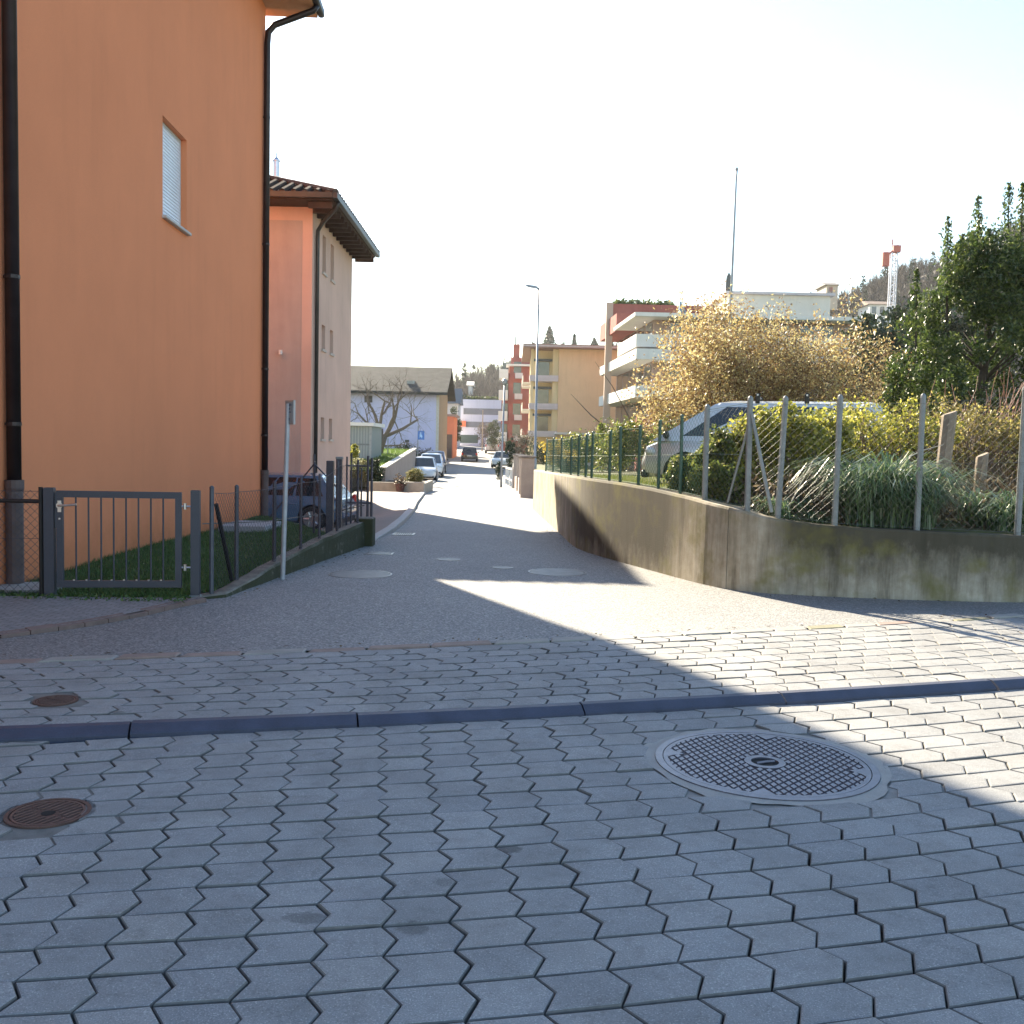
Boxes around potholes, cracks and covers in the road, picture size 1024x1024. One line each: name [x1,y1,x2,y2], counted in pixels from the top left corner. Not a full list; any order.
manhole cover [3,798,92,829]
manhole cover [33,695,79,707]
manhole cover [655,730,881,801]
manhole cover [328,570,392,578]
manhole cover [528,568,587,576]
